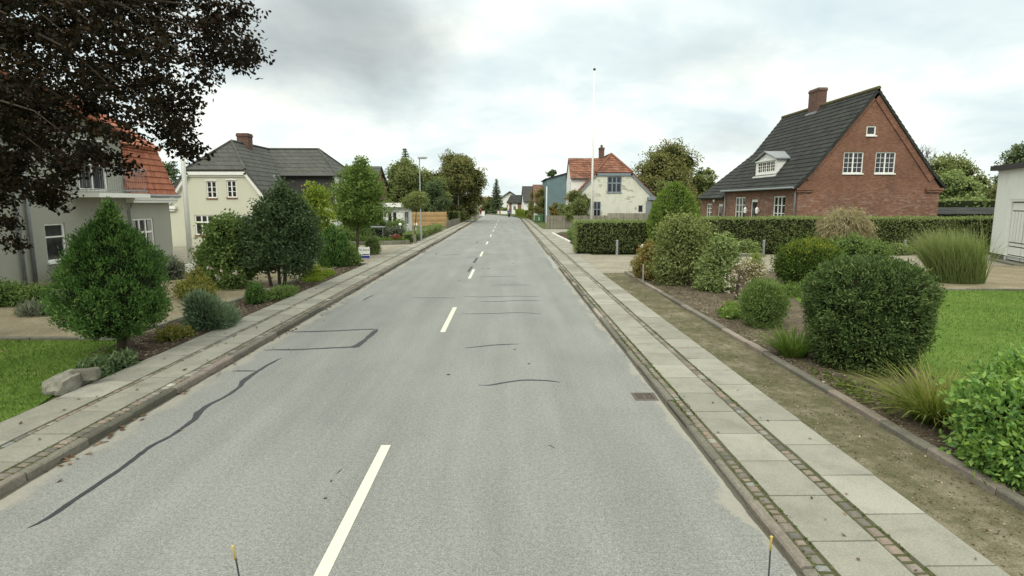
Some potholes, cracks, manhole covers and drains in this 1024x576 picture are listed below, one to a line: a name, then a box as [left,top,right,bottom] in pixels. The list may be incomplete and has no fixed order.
drain grate [631,393,659,401]
